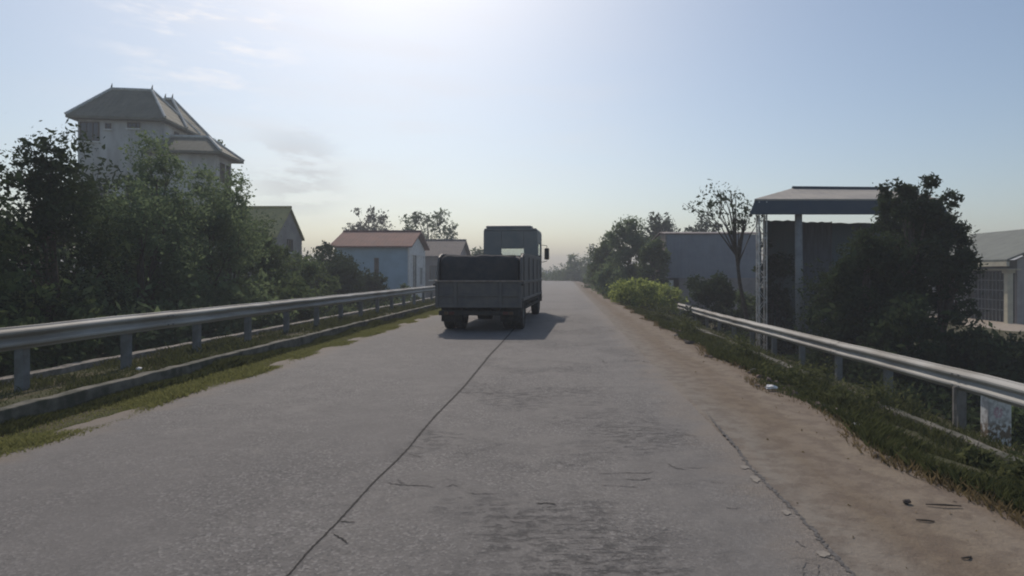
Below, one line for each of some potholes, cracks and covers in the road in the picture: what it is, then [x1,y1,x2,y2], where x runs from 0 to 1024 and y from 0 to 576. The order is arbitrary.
crack [286,293,546,576]
crack [601,415,856,576]
